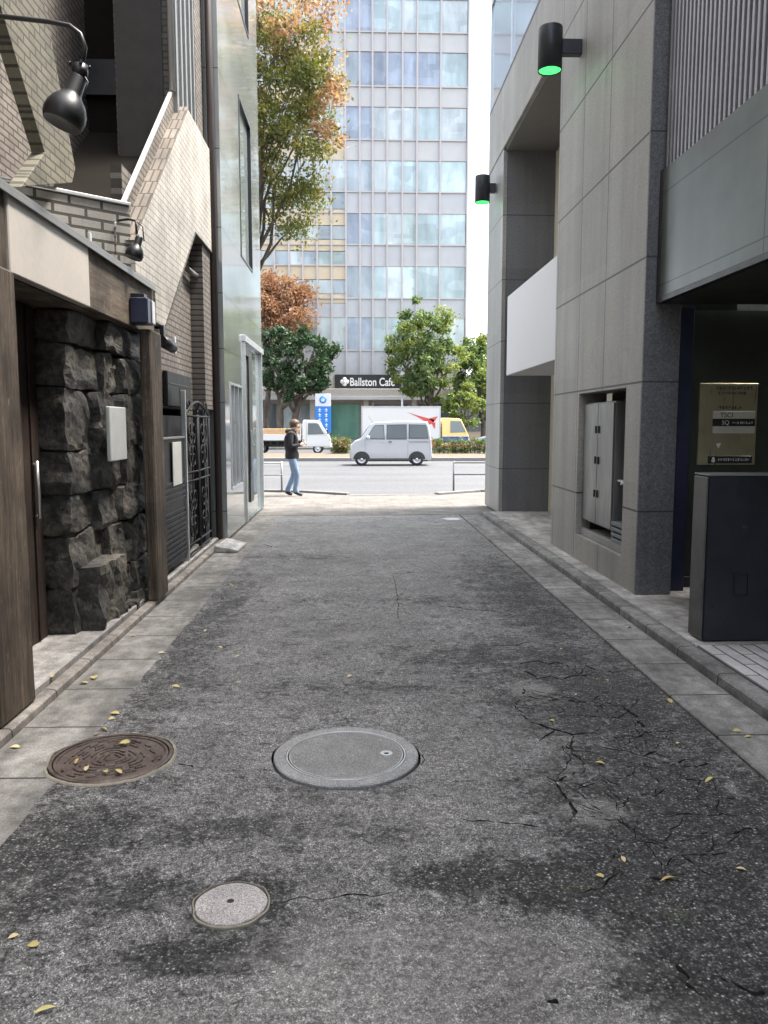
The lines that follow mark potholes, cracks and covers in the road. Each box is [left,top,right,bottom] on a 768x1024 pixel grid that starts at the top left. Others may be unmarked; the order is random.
manhole cover [43,733,177,787]
crack [463,819,539,827]
manhole cover [192,881,270,931]
crack [500,644,757,895]
crack [674,957,765,997]
crack [284,892,391,902]
manhole cover [274,727,418,790]
